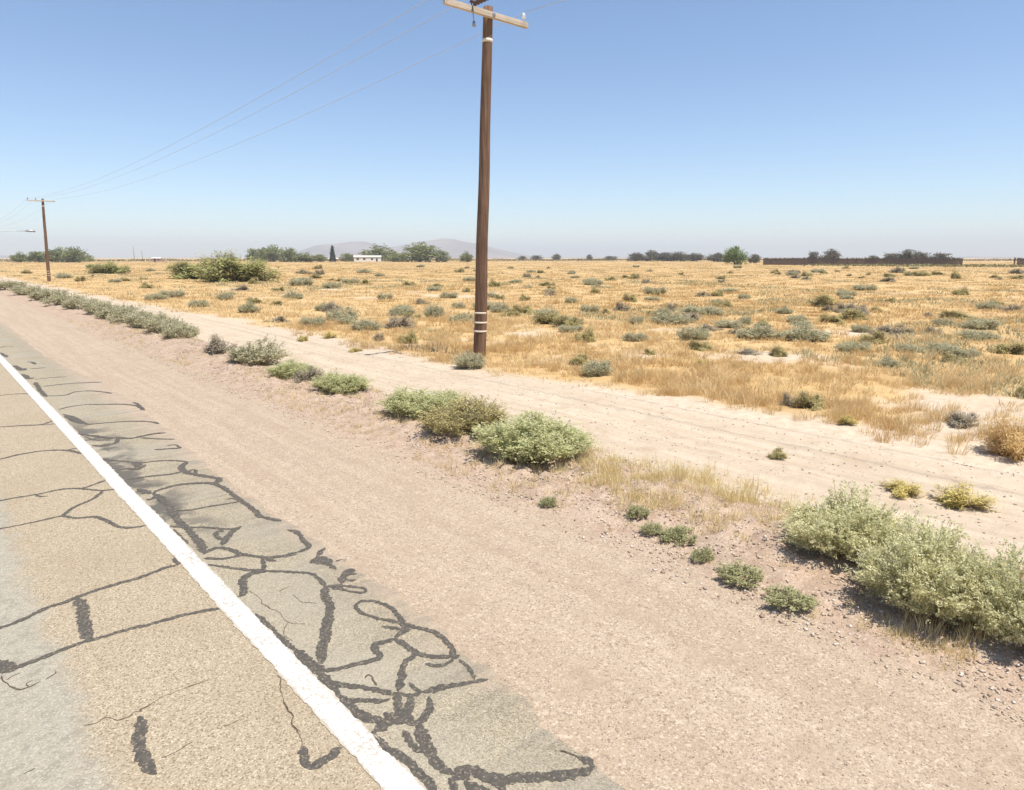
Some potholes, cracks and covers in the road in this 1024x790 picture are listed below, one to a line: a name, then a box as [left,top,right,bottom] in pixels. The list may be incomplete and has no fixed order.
crack [250,586,317,639]
crack [84,679,208,726]
